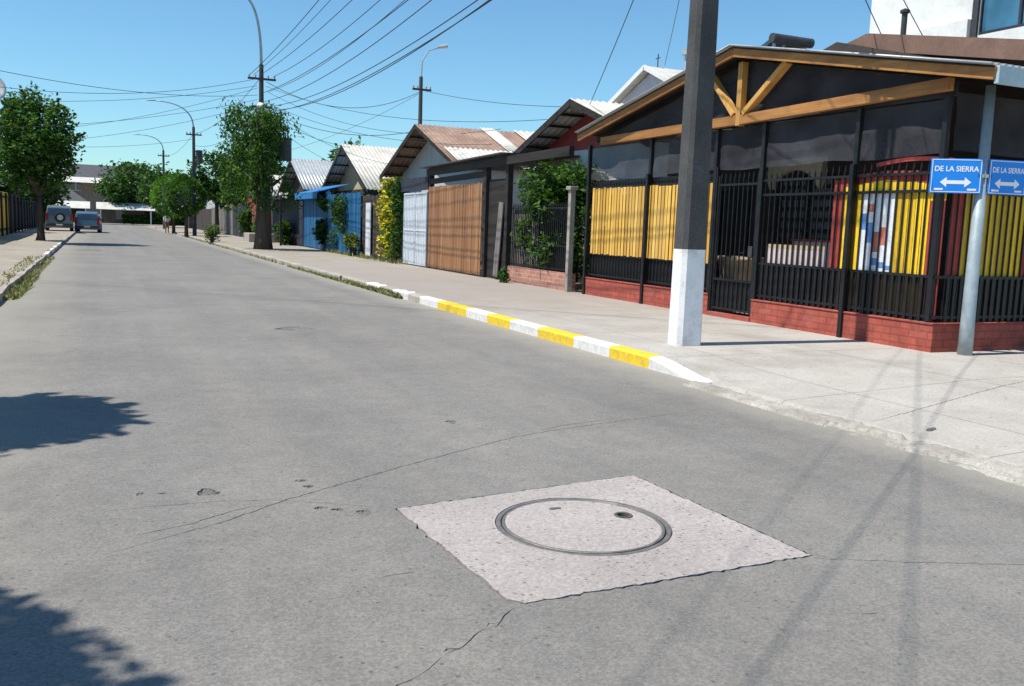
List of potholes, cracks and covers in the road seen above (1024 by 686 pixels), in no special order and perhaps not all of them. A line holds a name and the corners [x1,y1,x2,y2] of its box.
manhole cover [496,498,672,556]
crack [105,411,691,554]
crack [809,552,1024,565]
pothole [197,488,221,496]
crack [396,609,512,686]
